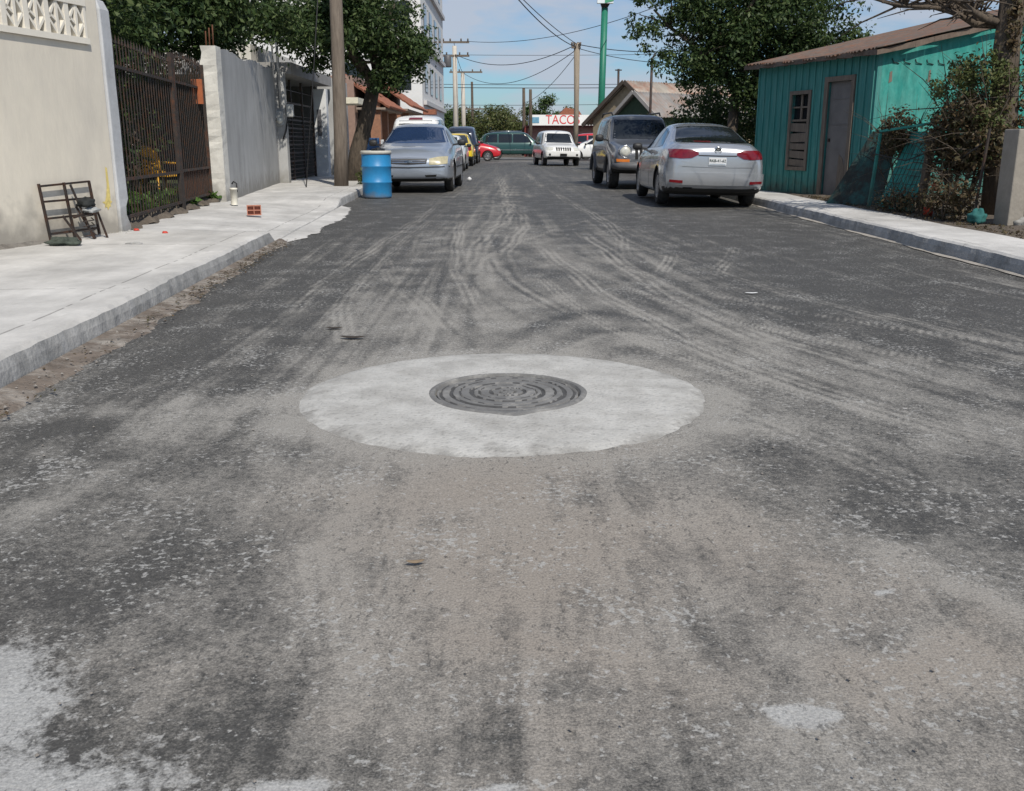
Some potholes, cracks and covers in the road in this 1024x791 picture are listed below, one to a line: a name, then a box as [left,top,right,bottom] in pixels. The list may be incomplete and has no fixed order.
manhole cover [429,373,587,416]
